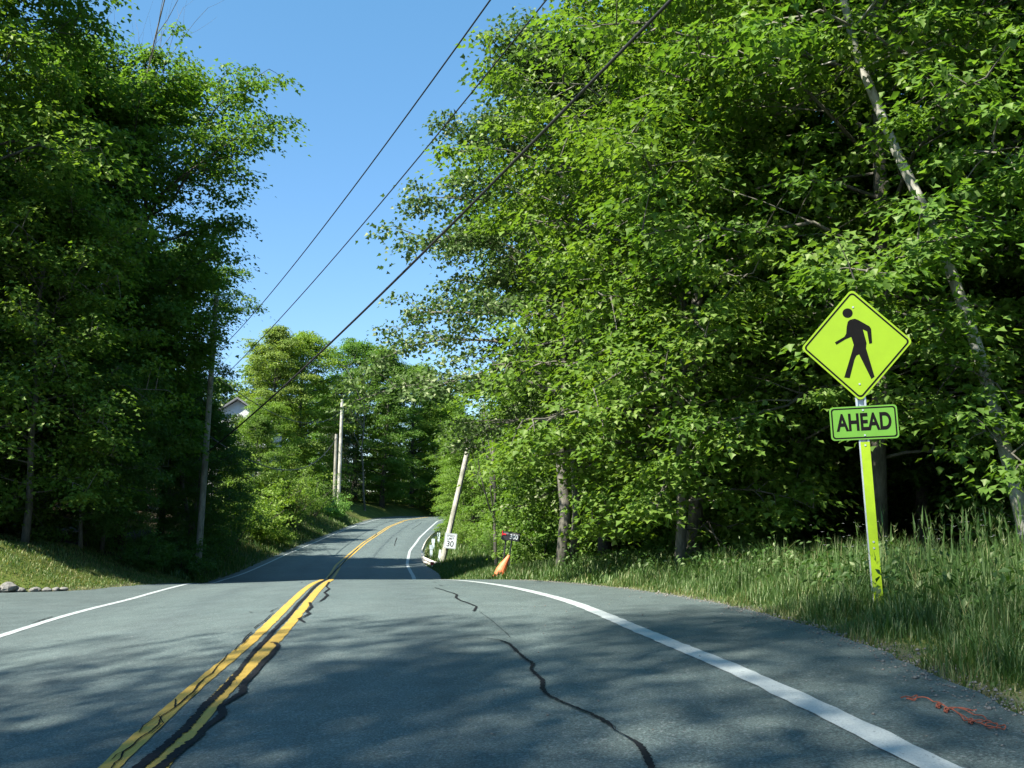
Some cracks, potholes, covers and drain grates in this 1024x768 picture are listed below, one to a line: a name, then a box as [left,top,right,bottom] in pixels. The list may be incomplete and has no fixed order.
crack [435,585,655,768]
